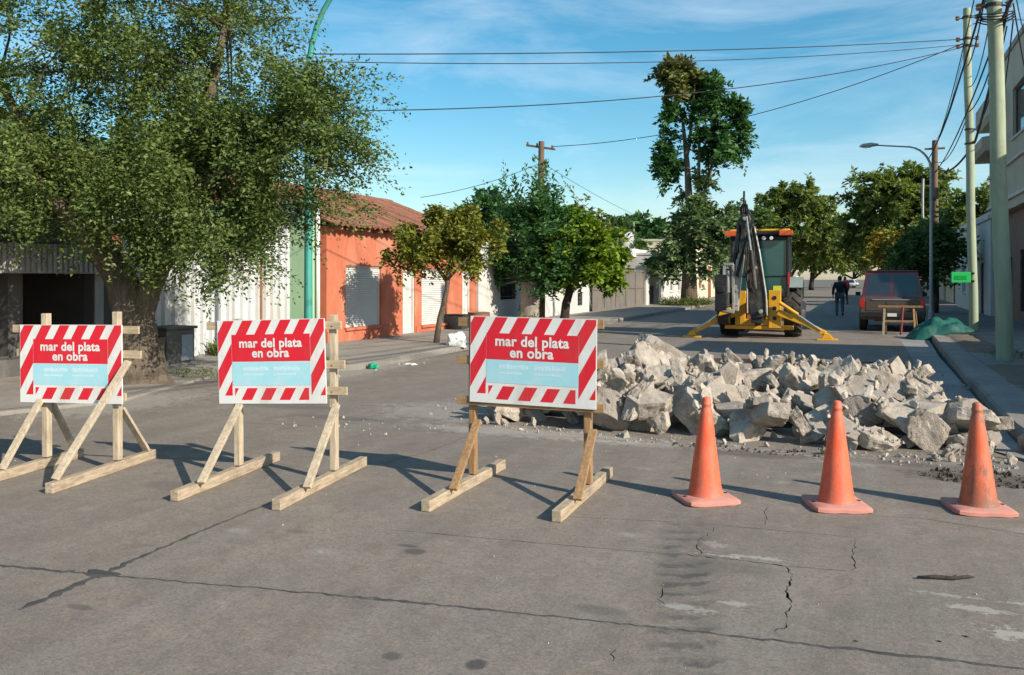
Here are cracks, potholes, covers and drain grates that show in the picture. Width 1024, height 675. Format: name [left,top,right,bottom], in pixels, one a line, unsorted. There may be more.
crack [389,507,856,636]
